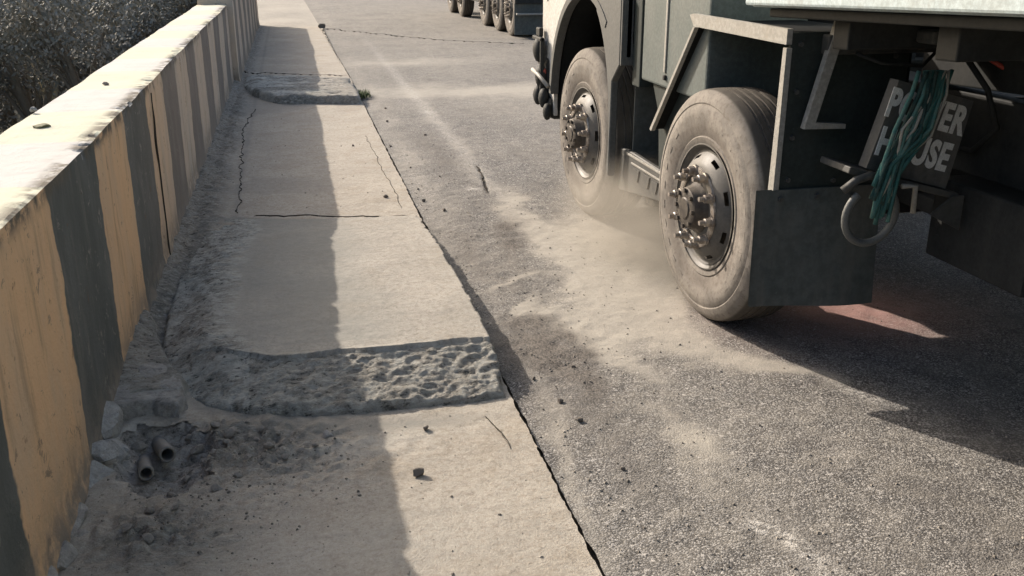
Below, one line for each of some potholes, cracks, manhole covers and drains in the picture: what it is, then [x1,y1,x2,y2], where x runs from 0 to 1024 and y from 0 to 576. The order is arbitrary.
pothole [113,421,228,499]
crack [235,109,406,217]
crack [334,29,524,44]
